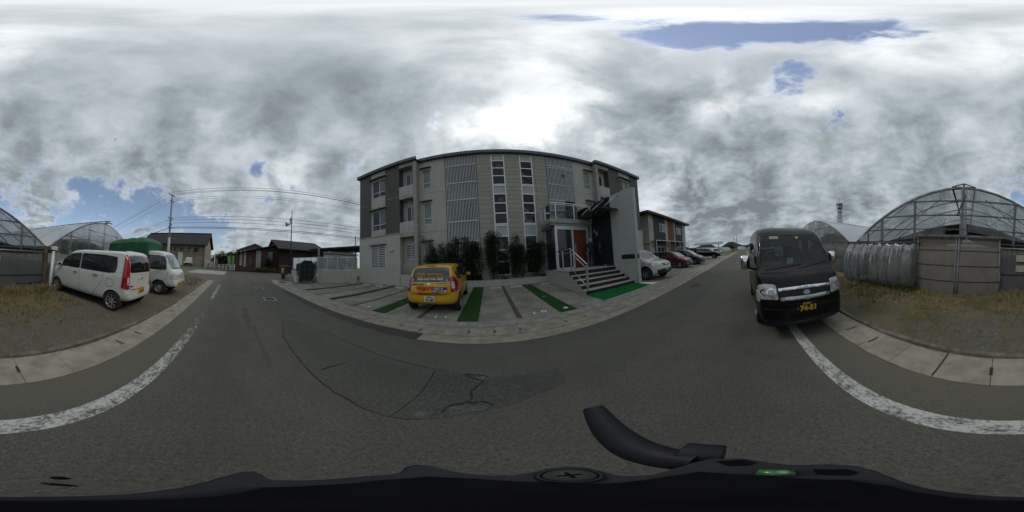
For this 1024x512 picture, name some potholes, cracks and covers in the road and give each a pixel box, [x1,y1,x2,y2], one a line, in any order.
pothole [442,401,494,415]
